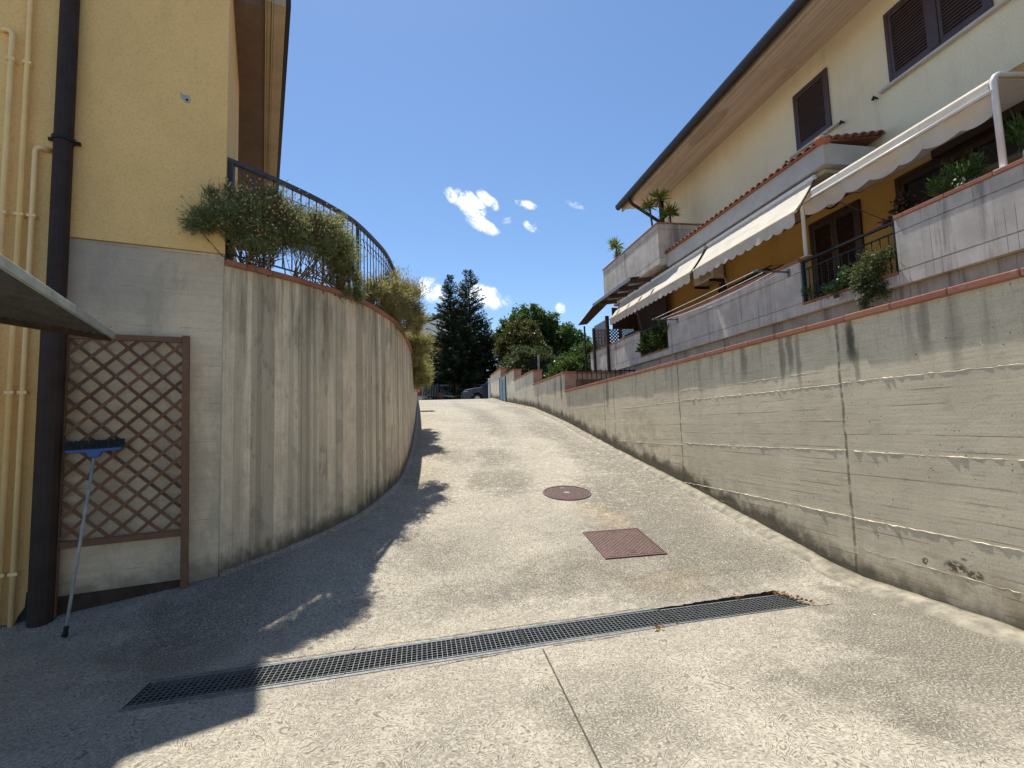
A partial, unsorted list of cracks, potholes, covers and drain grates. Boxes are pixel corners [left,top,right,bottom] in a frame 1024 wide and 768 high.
drain grate [660,594,807,624]
drain grate [124,653,351,709]
drain grate [519,609,677,646]
drain grate [346,629,526,674]
manhole cover [543,485,591,501]
manhole cover [583,528,668,560]
